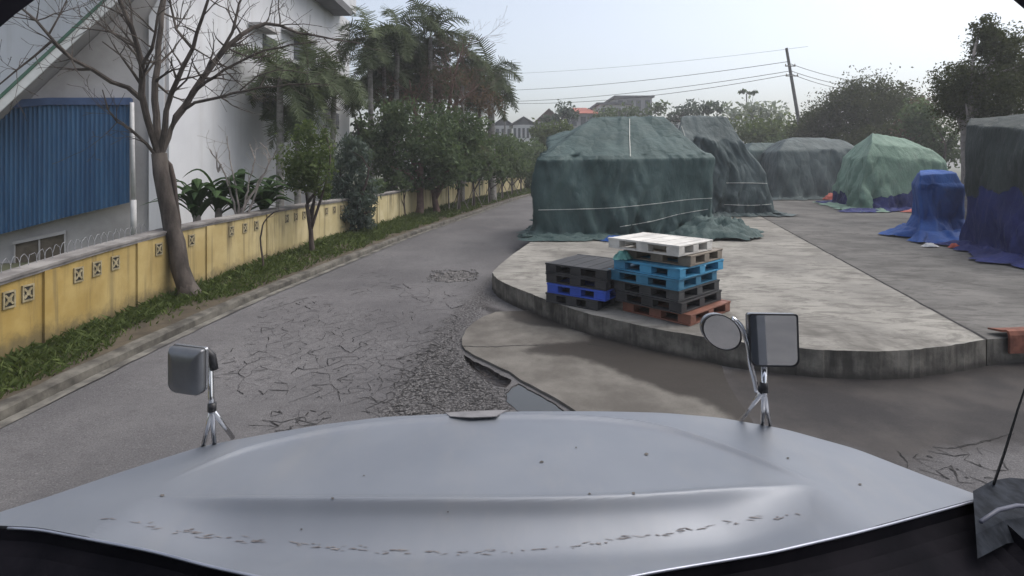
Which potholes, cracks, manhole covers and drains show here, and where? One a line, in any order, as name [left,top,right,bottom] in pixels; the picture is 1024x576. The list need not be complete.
crack [898,433,1014,488]
crack [215,272,600,432]
pothole [429,270,479,283]
pothole [464,355,511,387]
